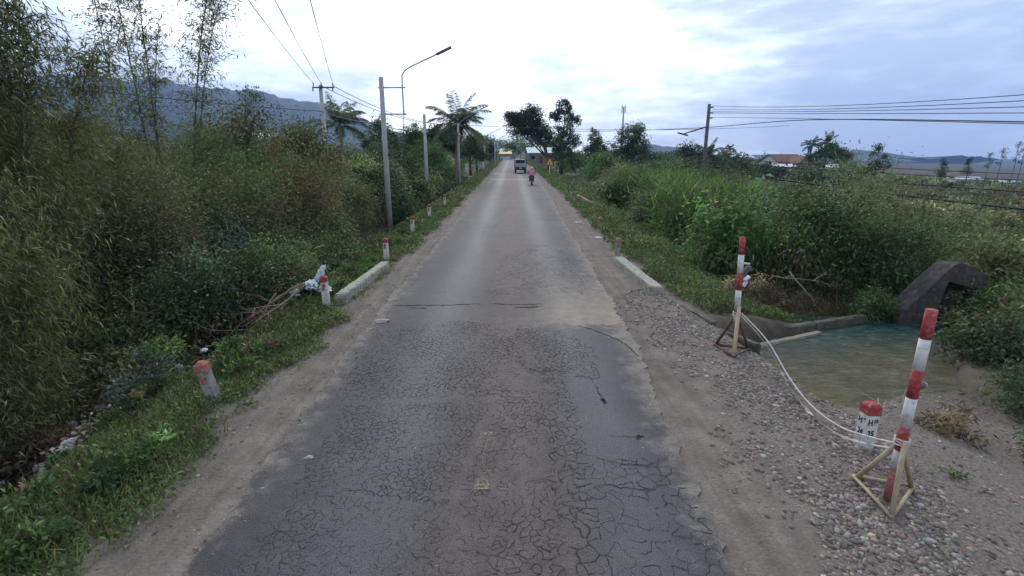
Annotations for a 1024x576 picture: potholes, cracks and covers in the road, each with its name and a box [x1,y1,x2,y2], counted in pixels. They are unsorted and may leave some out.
crack [438,325,727,576]
crack [333,320,526,401]
crack [230,485,453,576]
crack [293,401,489,505]
